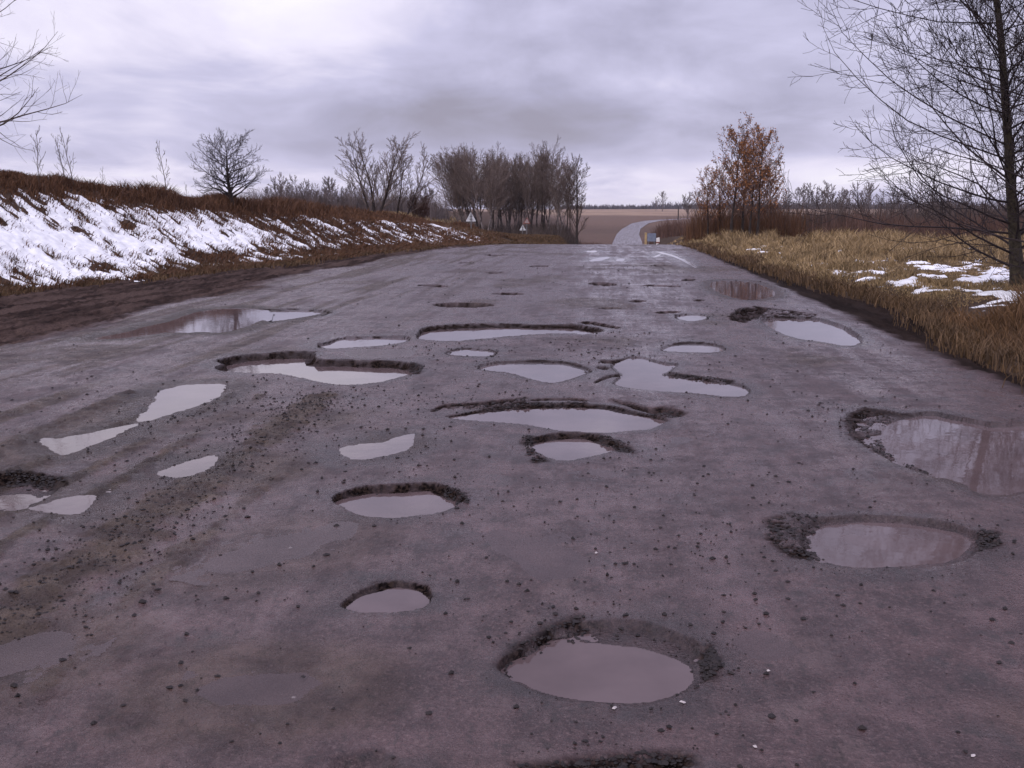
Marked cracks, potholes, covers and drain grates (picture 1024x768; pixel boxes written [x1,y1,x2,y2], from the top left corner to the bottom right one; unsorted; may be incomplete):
pothole [134,450,238,484]
pothole [497,616,724,707]
pothole [214,353,425,385]
pothole [330,345,429,361]
pothole [767,513,1003,571]
pothole [117,379,245,428]
pothole [445,401,669,433]
pothole [315,335,413,349]
pothole [317,427,437,465]
pothole [610,356,751,399]
pothole [340,580,434,613]
pothole [18,420,156,460]
